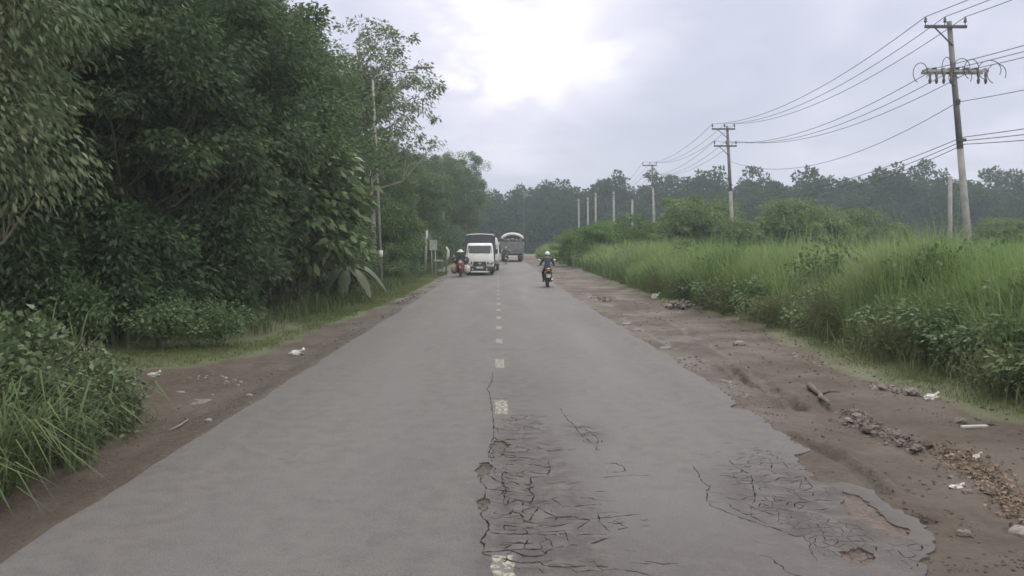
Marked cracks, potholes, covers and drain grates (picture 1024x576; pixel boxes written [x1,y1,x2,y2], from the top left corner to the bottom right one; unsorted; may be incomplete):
pothole [839,547,876,566]
crack [480,372,679,576]
crack [692,443,925,576]
pothole [474,462,493,478]
